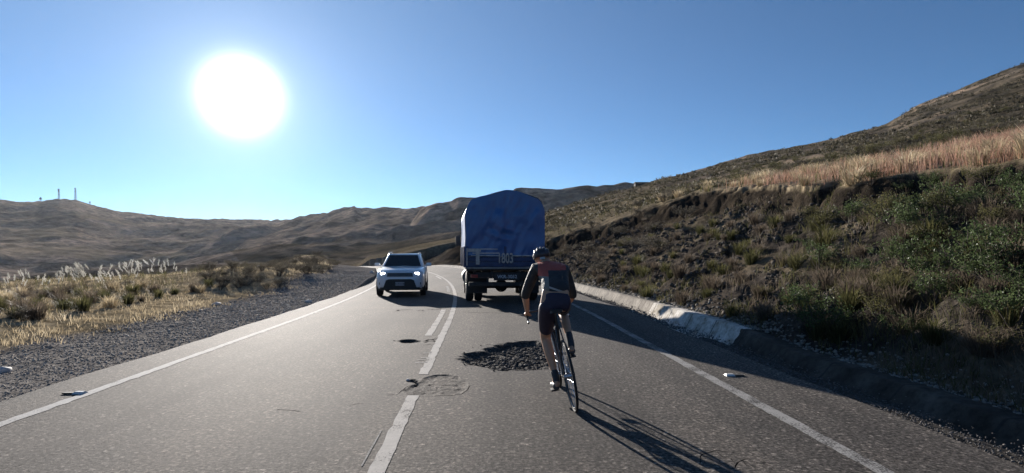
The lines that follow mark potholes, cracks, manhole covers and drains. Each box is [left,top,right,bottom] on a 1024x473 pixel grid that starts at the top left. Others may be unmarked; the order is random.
pothole [453,340,567,371]
